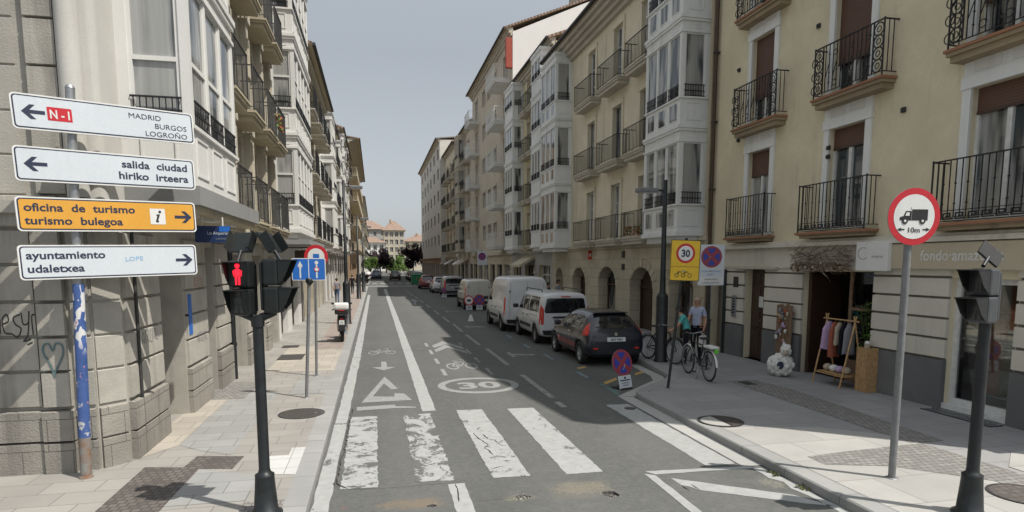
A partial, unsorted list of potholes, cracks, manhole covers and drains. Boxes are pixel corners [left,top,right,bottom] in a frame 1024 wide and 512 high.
manhole cover [278,408,325,419]
manhole cover [697,415,744,427]
